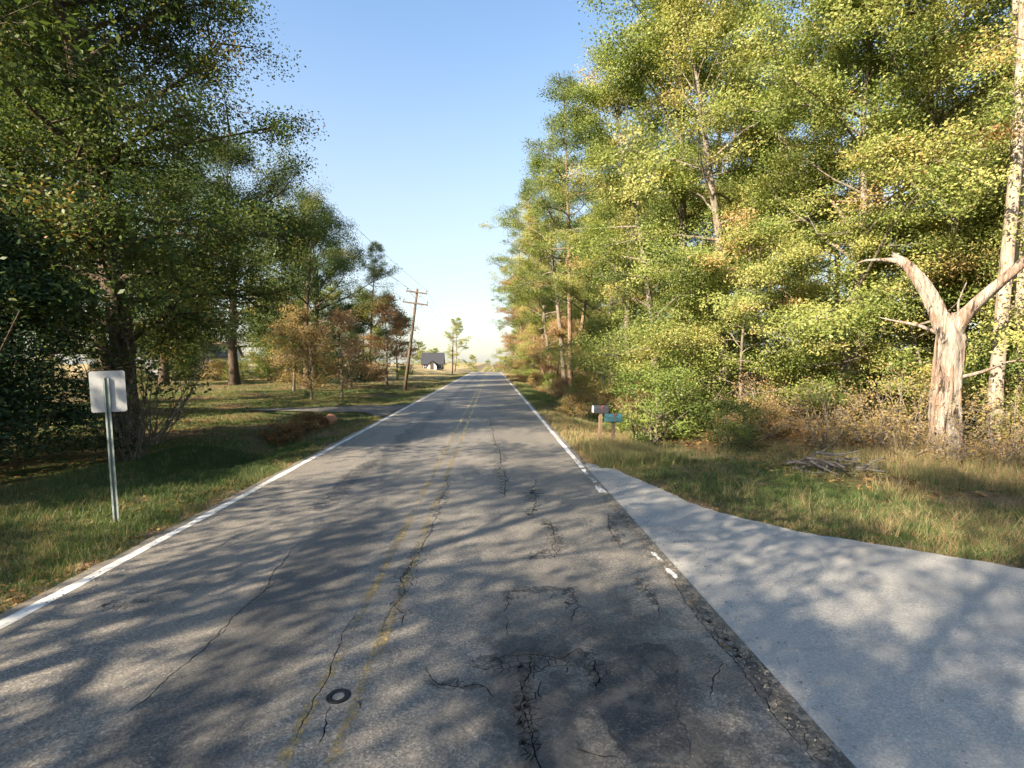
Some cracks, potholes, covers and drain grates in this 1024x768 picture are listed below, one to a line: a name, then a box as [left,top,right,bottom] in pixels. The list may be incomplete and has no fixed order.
crack [109,545,297,724]
crack [425,648,607,768]
manhole cover [326,688,351,704]
crack [490,420,560,560]
crack [500,584,581,633]
crack [295,618,354,742]
